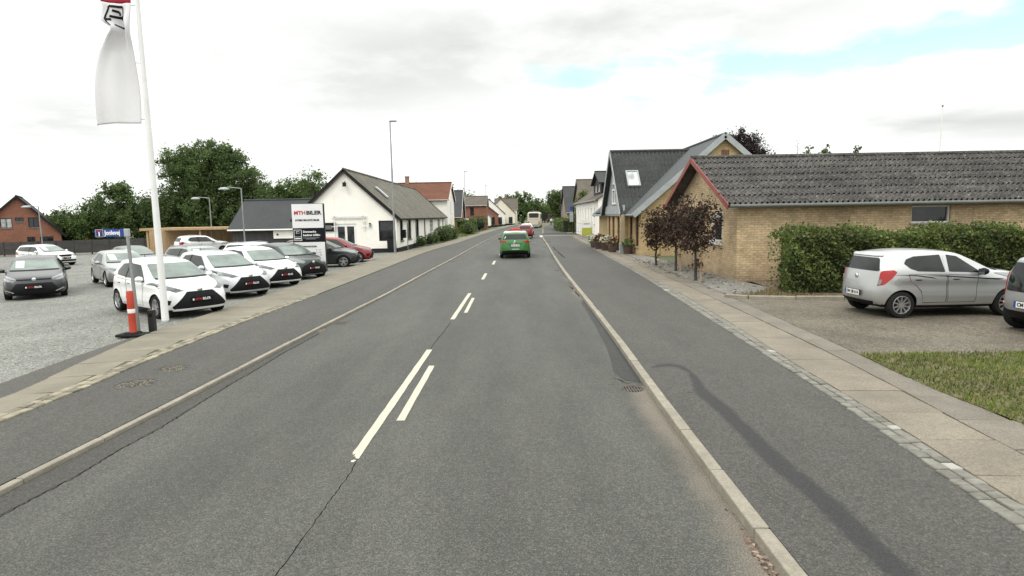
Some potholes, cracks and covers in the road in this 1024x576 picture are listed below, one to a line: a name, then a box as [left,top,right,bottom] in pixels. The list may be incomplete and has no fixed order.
manhole cover [112,379,159,390]
manhole cover [152,365,191,373]
crack [275,460,357,576]
crack [0,333,320,517]
